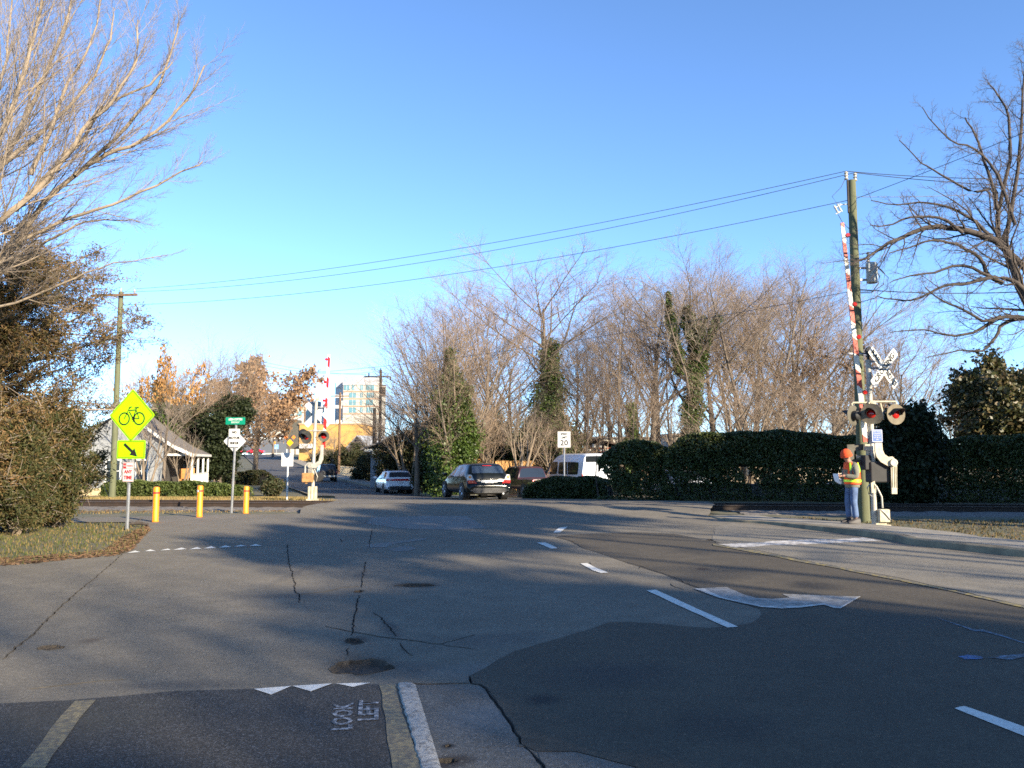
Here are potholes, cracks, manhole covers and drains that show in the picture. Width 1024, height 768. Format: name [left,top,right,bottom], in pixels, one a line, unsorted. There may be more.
crack [287,530,473,655]
pothole [328,658,395,675]
